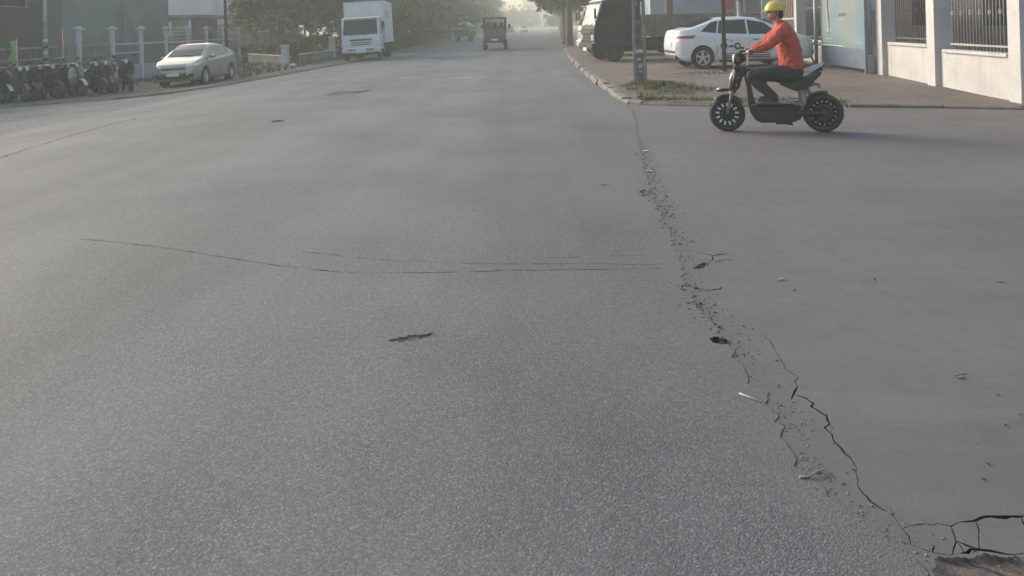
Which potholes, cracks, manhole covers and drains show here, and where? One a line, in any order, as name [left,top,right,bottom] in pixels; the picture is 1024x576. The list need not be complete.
pothole [932,553,1024,576]
crack [763,335,1024,556]
pothole [389,333,437,343]
